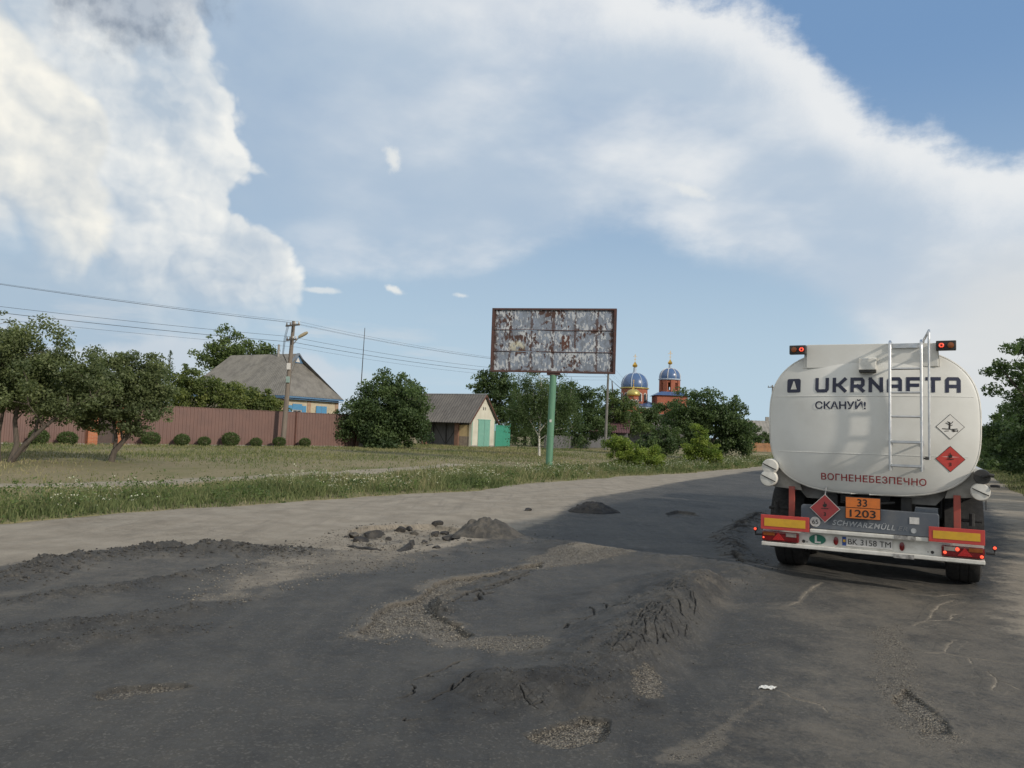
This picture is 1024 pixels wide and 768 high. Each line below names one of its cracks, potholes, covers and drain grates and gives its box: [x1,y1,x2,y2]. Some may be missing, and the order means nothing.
pothole [661,510,702,518]
crack [442,570,765,664]
crack [900,592,1024,695]
pothole [872,688,975,744]
crack [386,656,555,727]
pothole [341,561,552,648]
pothole [507,704,627,756]
pothole [74,679,213,708]
crack [715,511,832,608]
